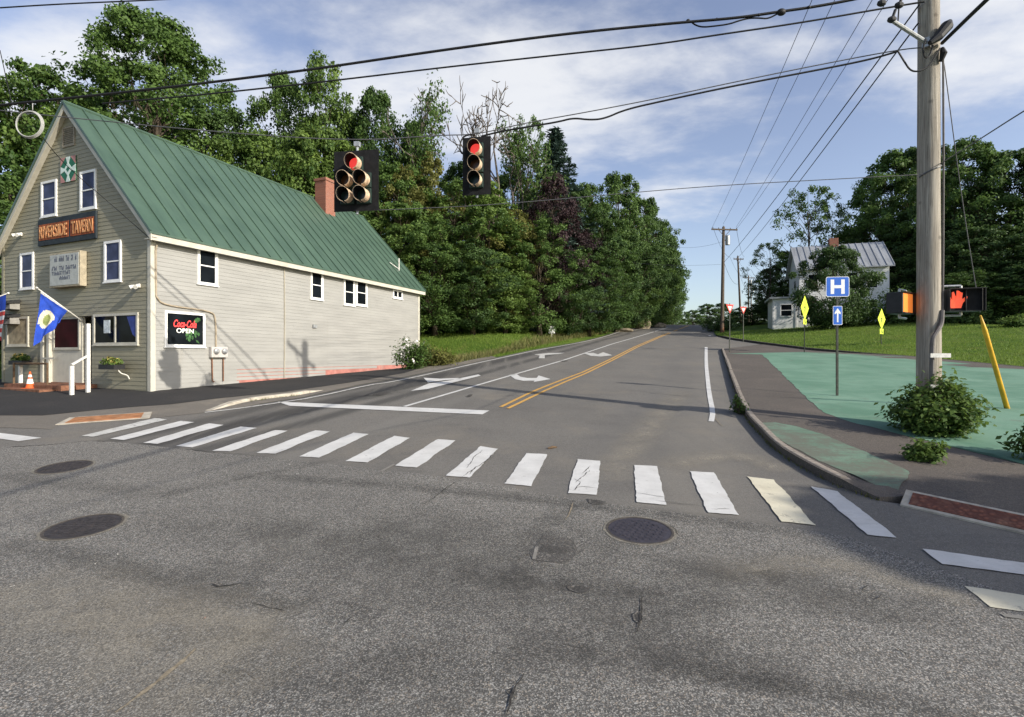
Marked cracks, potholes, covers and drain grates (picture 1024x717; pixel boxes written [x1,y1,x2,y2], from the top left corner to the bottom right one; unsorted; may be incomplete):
crack [502,674,524,714]
manhole cover [36,513,129,541]
manhole cover [603,516,678,546]
manhole cover [30,459,96,475]
